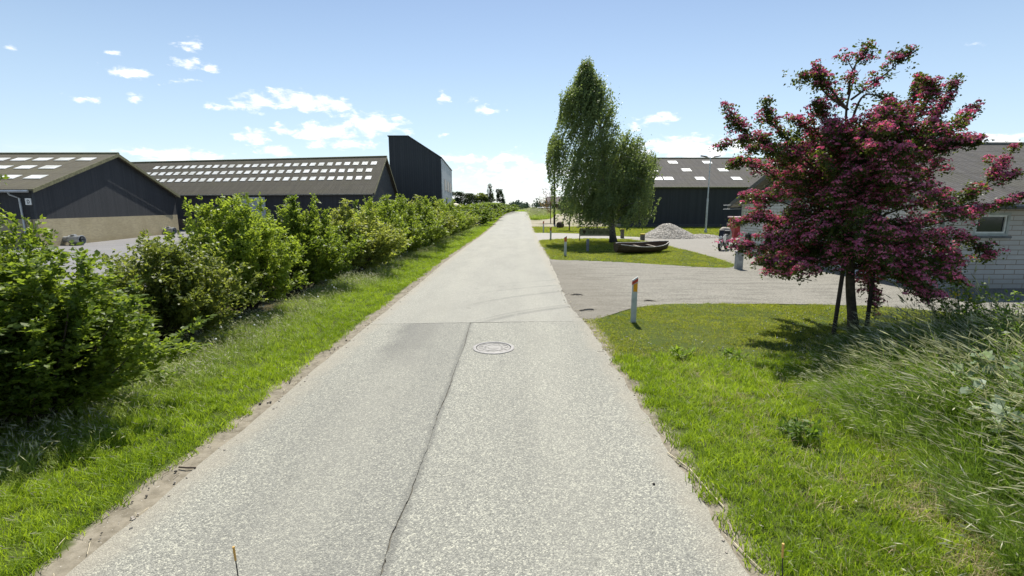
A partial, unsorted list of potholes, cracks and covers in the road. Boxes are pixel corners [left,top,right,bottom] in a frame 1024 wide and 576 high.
manhole cover [473,342,514,354]
crack [370,321,587,576]
